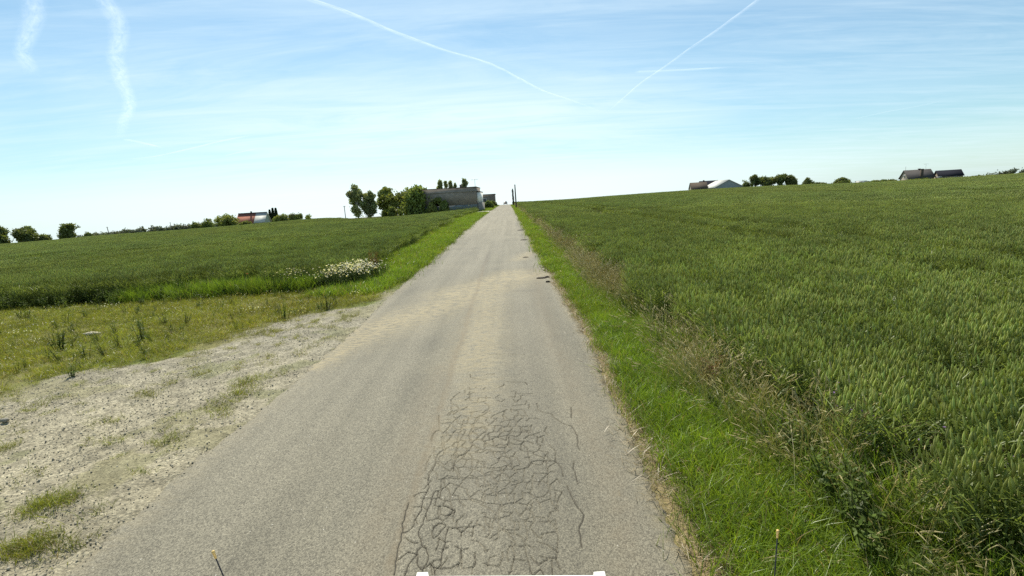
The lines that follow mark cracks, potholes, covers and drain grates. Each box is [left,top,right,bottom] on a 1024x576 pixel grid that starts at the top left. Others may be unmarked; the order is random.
crack [394,385,564,576]
crack [537,407,585,549]
